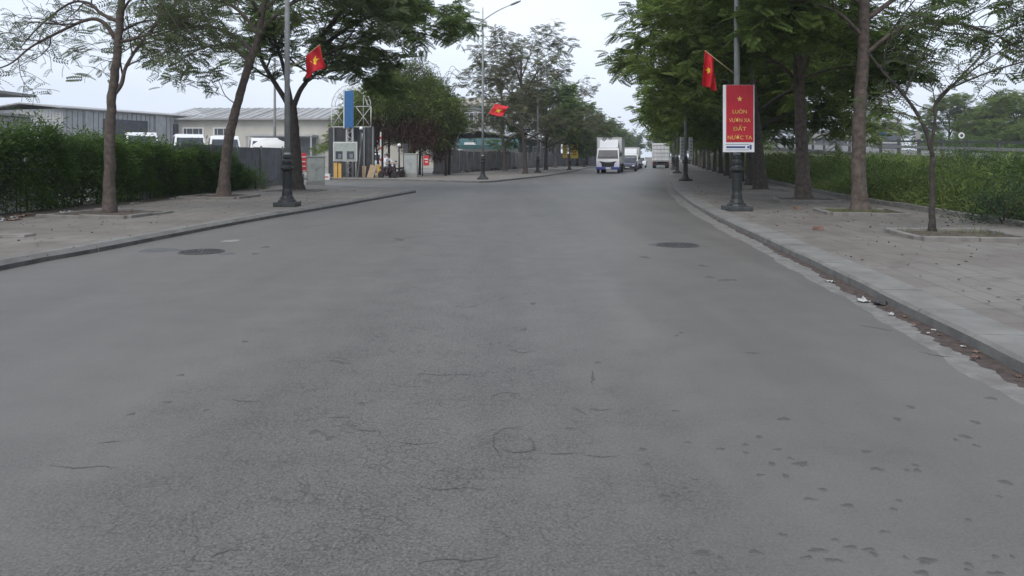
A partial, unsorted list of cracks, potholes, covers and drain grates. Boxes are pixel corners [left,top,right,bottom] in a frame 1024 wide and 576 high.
crack [492,426,620,457]
